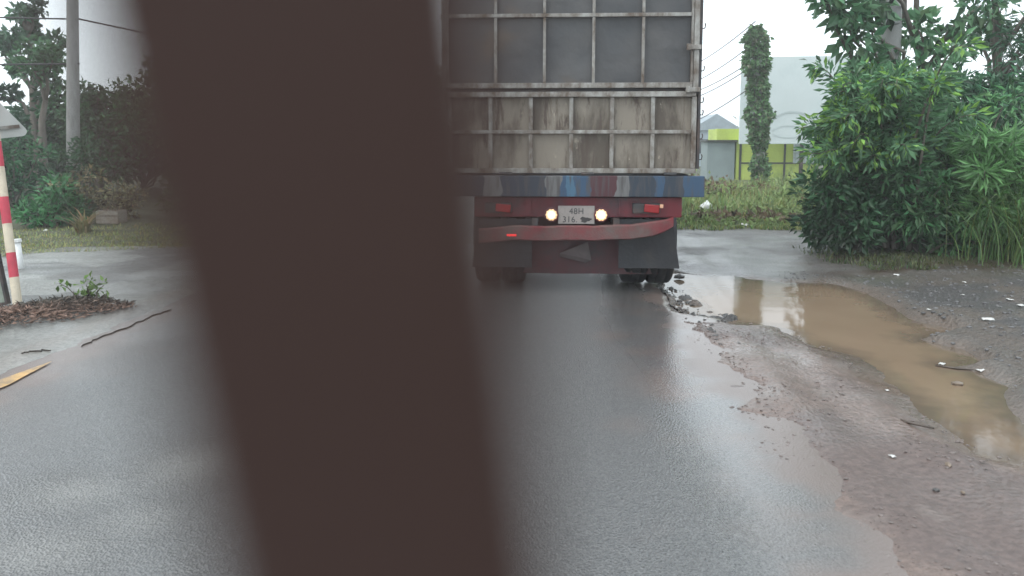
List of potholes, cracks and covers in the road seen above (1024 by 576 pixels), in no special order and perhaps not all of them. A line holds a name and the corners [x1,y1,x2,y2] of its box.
crack [81,321,142,347]
pothole [658,283,740,345]
